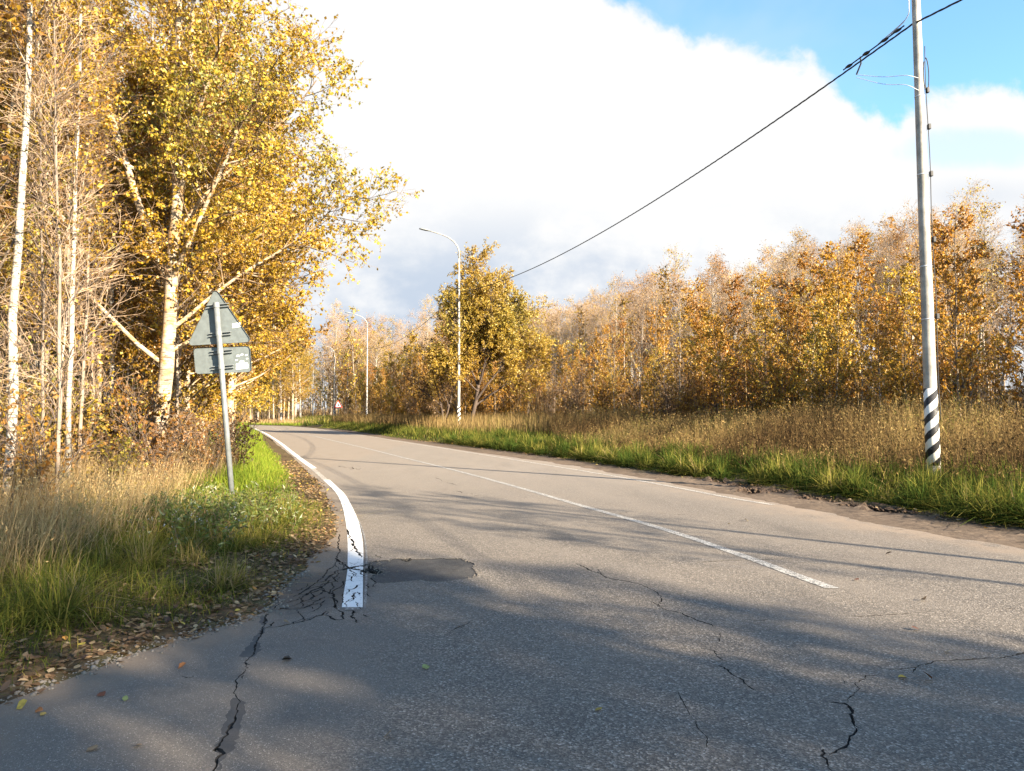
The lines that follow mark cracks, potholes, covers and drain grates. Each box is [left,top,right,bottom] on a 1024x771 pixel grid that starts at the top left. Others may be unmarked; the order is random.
crack [820,652,1024,771]
crack [580,565,754,690]
crack [266,530,381,628]
crack [212,612,269,771]
